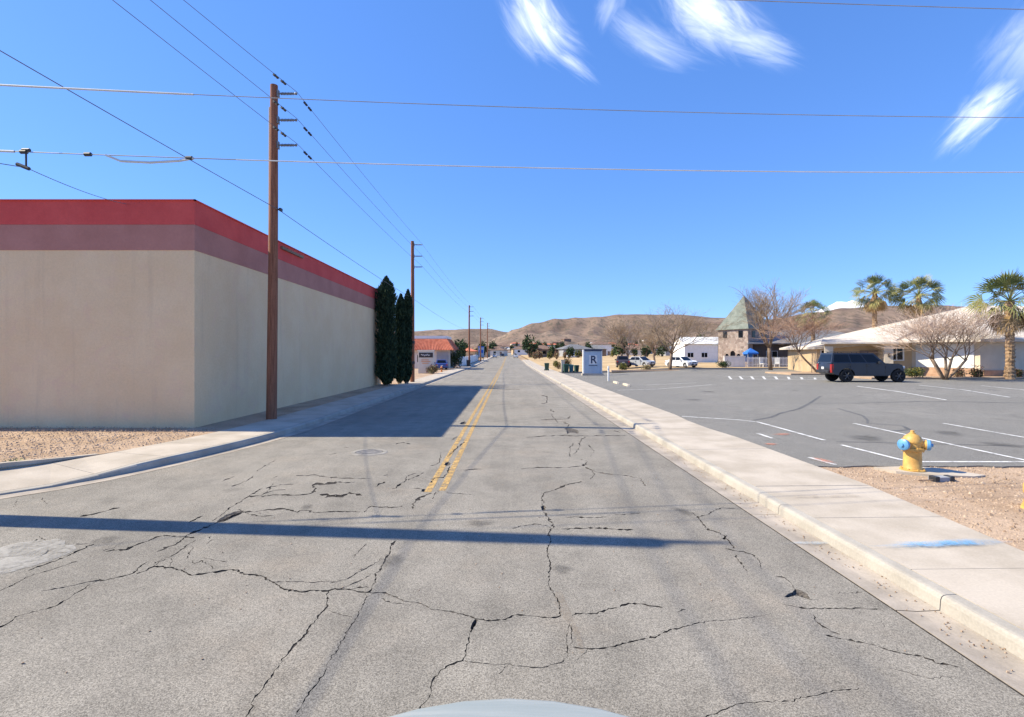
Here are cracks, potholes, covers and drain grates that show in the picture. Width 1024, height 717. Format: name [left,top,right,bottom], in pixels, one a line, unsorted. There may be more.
crack [0,395,759,717]
crack [693,508,958,679]
pothole [785,589,810,600]
crack [706,688,859,717]
